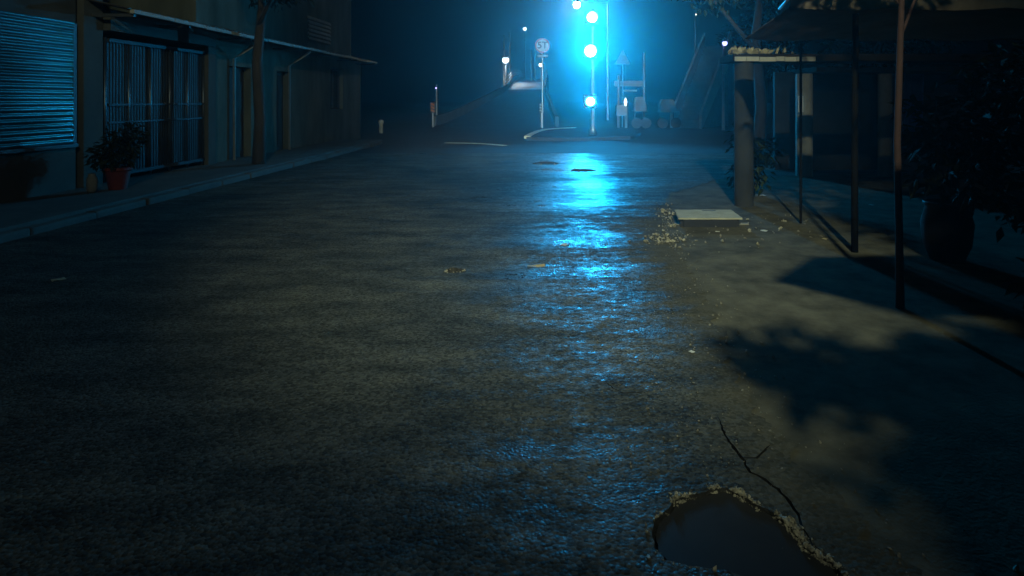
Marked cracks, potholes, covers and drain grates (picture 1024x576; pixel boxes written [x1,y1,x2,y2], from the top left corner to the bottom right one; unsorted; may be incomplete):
crack [717,416,827,555]
pothole [645,484,849,576]
manhole cover [673,210,749,227]
